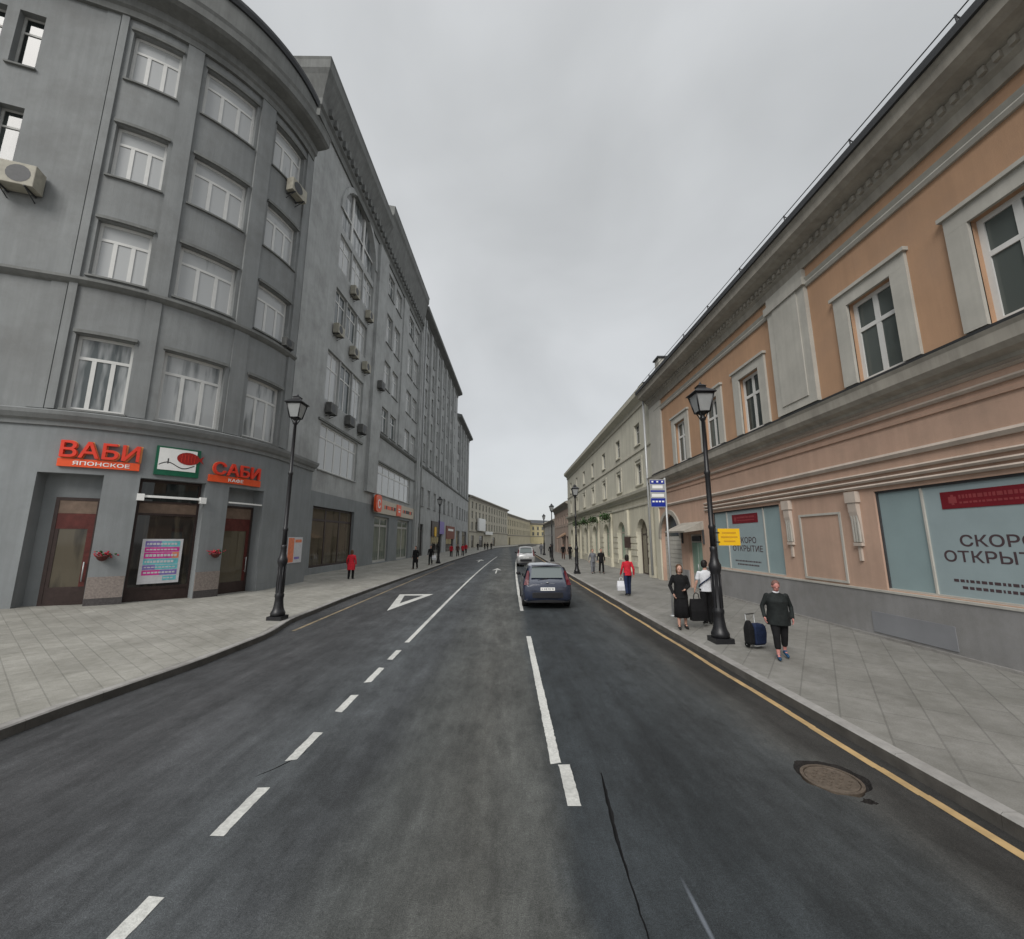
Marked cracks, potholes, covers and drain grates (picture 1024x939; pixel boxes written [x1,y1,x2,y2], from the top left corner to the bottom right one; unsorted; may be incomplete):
manhole cover [793,760,873,798]
crack [601,773,649,939]
